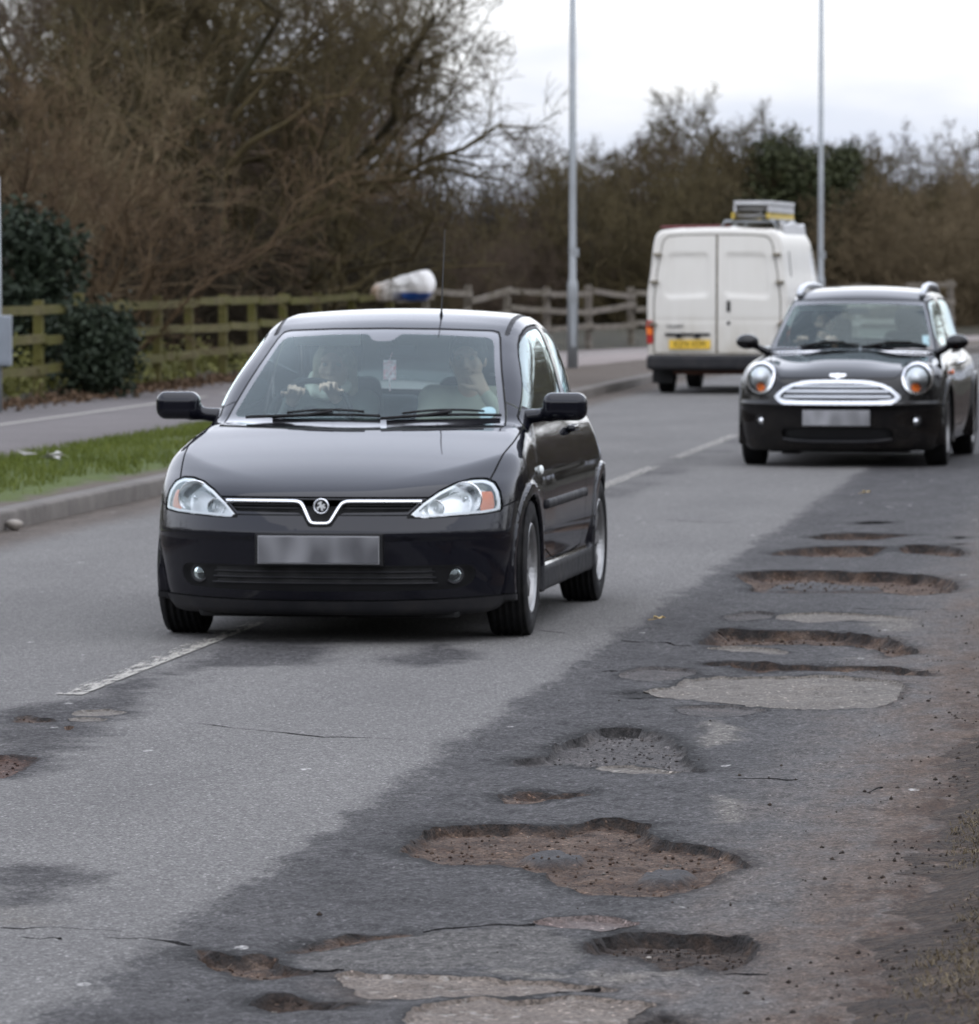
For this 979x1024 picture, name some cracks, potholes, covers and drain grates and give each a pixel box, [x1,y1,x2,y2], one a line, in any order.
crack [196,723,403,740]
pothole [596,765,680,774]
pothole [248,993,362,1013]
crack [0,927,192,946]
pothole [698,628,919,657]
pothole [898,544,965,557]
pothole [771,546,887,558]
pothole [510,727,709,772]
pothole [735,570,960,595]
pothole [194,950,317,981]
pothole [497,791,591,804]
pothole [580,932,762,972]
